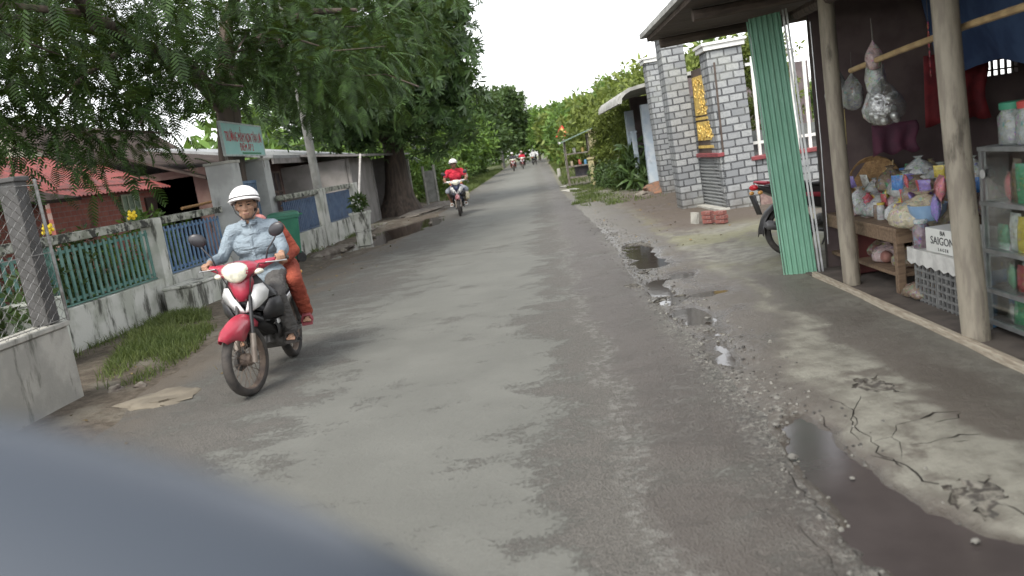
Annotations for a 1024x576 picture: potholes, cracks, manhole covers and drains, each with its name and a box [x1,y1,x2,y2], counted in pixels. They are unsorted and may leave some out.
pothole [941,475,1010,522]
crack [820,397,978,484]
